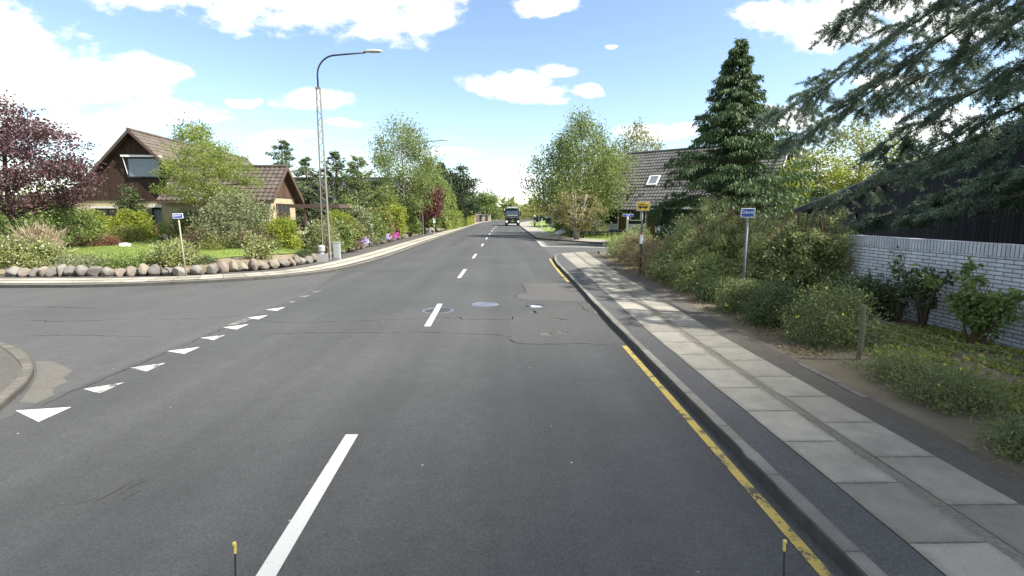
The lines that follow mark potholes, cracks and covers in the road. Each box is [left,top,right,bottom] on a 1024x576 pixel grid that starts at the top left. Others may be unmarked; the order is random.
crack [74,479,149,505]
crack [270,315,604,345]
